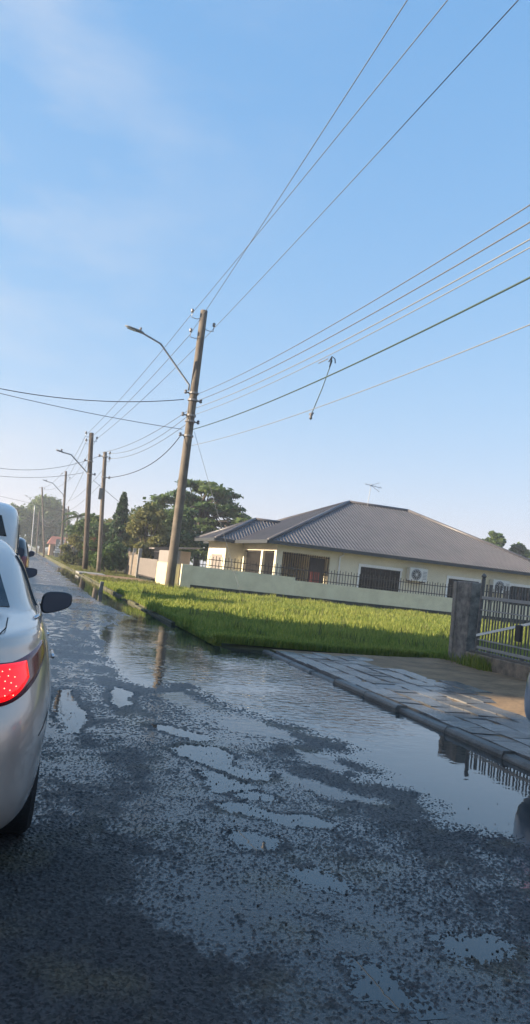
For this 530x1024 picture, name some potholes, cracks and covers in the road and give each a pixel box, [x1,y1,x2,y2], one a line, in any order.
pothole [168,743,274,781]
pothole [49,688,90,734]
pothole [108,686,137,708]
pothole [151,723,217,743]
pothole [422,927,521,970]
pothole [219,827,285,851]
